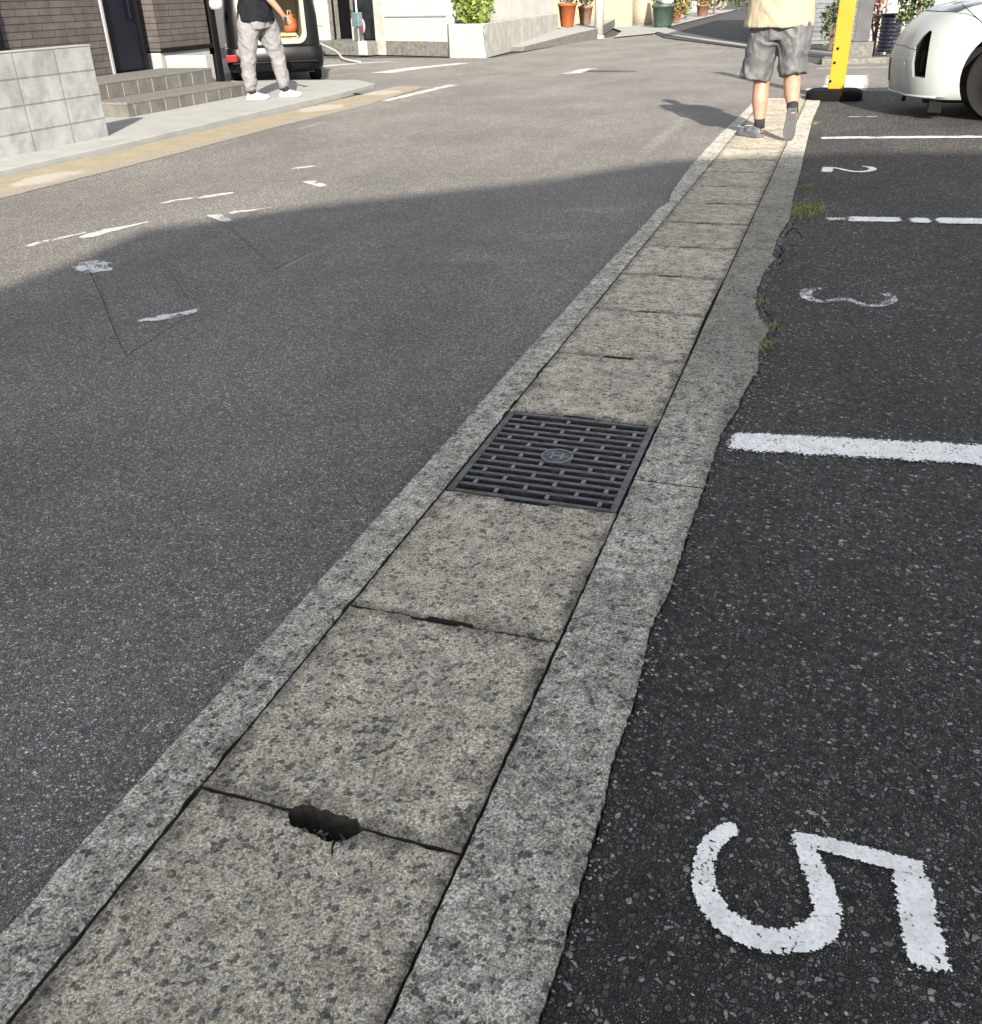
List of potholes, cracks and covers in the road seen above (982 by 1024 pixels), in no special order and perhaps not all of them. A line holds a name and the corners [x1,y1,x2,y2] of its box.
drain grate [446,411,656,519]
crack [776,220,803,267]
